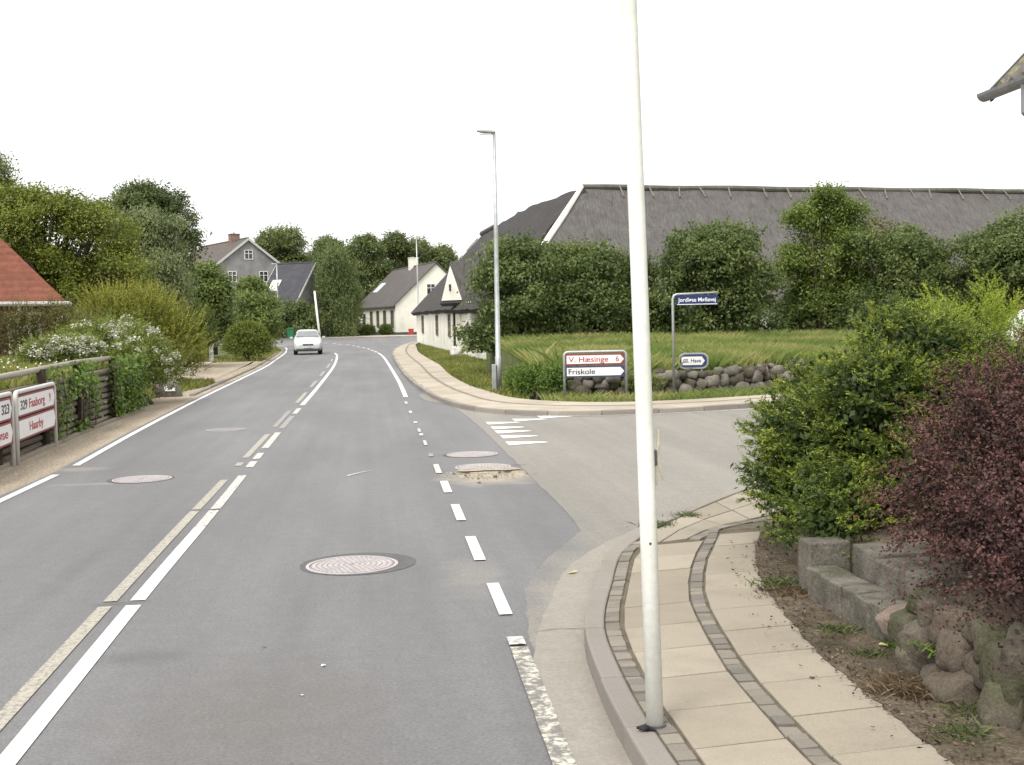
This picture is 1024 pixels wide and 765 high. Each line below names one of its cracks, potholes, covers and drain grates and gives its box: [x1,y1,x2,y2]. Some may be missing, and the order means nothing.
manhole cover [455,463,511,471]
manhole cover [106,475,175,484]
manhole cover [300,553,416,575]
pothole [436,466,539,483]
